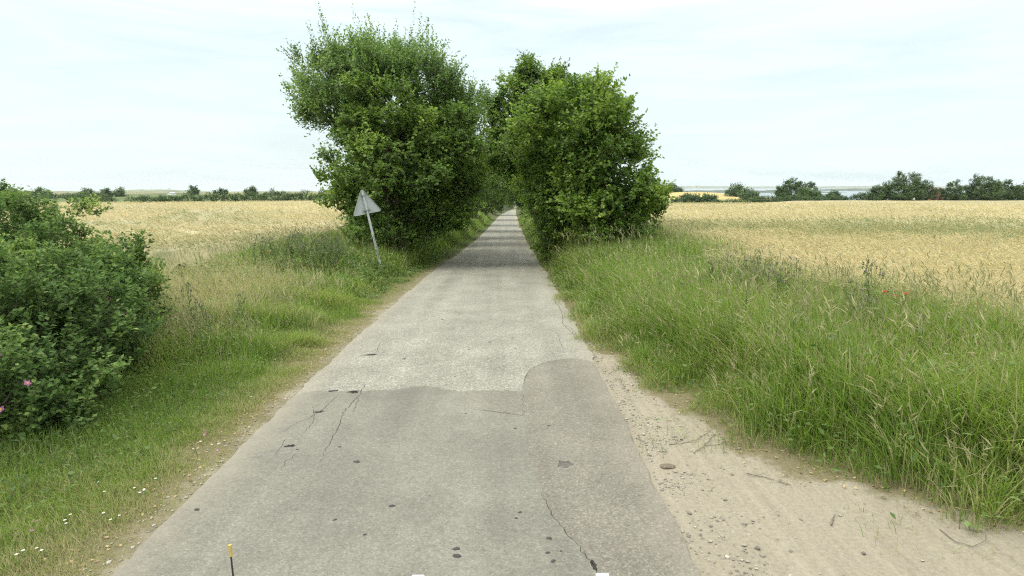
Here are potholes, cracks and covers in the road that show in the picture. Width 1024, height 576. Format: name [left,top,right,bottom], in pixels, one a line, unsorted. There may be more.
crack [276,386,365,468]
